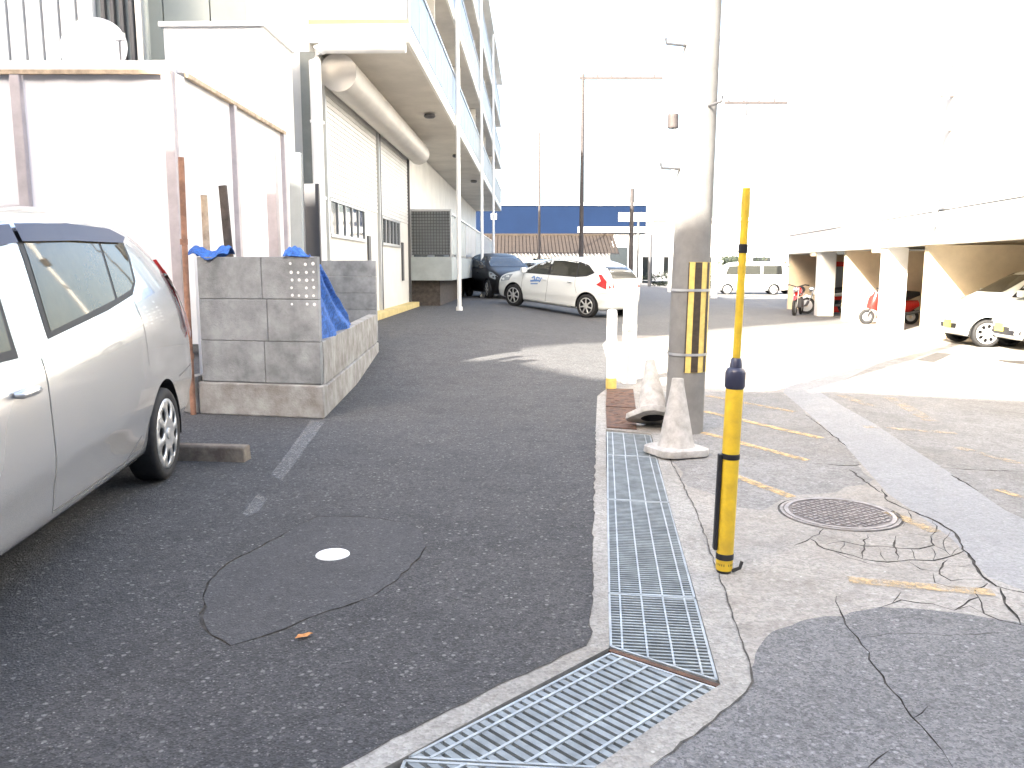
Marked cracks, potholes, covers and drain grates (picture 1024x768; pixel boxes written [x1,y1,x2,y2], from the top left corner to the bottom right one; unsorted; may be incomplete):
drain grate [607,499,696,599]
drain grate [400,759,556,768]
manhole cover [778,497,904,532]
crack [796,463,1024,768]
drain grate [607,431,656,457]
drain grate [608,593,718,683]
drain grate [607,455,669,503]
